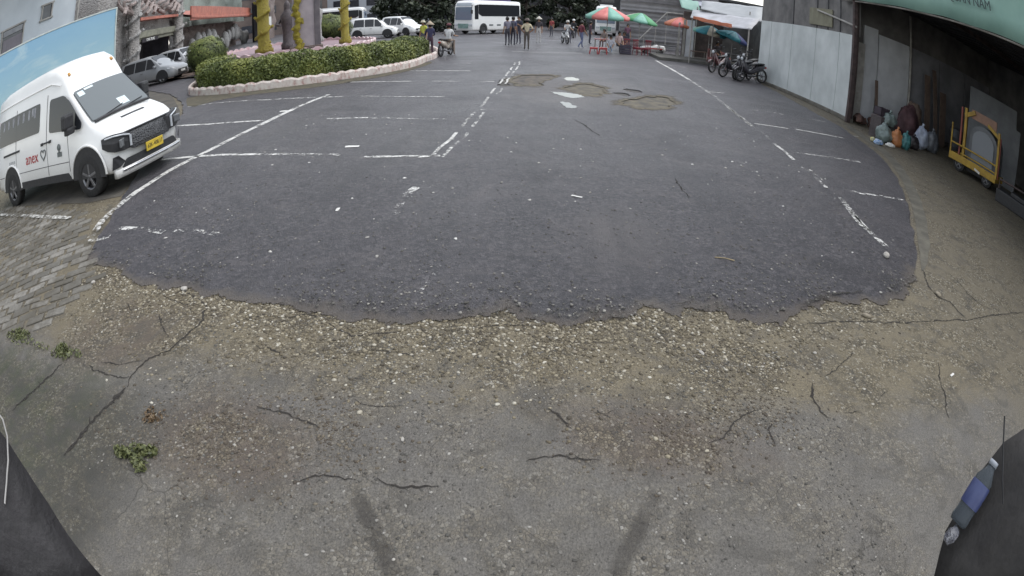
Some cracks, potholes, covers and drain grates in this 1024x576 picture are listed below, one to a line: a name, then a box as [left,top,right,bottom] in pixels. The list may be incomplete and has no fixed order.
crack [300,474,351,483]
crack [810,351,864,418]
crack [378,478,435,489]
crack [923,271,986,319]
crack [255,405,318,427]
crack [89,290,207,387]
crack [709,409,776,446]
